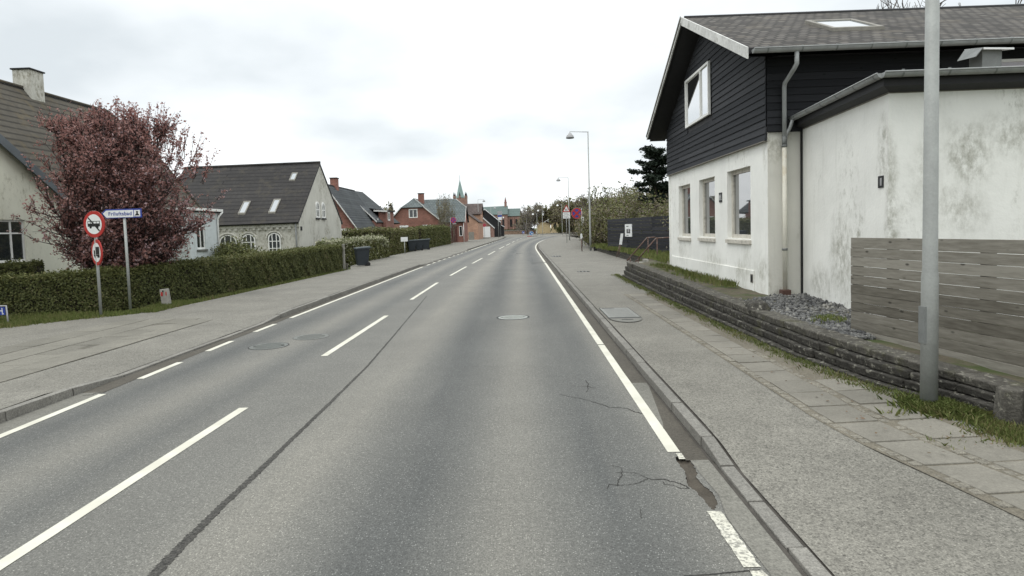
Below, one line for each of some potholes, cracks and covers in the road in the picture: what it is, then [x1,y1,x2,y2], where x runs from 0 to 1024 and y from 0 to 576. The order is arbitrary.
manhole cover [599,306,642,322]
crack [607,465,689,489]
manhole cover [248,342,289,350]
